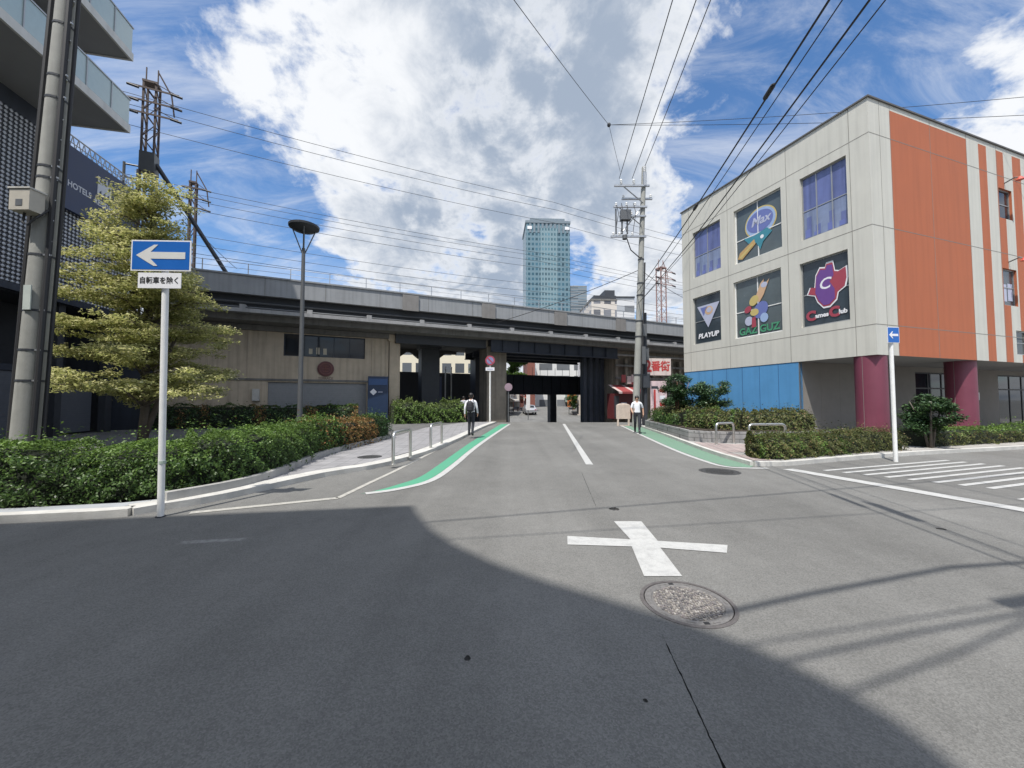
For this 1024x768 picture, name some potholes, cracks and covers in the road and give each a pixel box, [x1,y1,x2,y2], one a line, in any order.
manhole cover [640,581,739,629]
crack [663,637,726,768]
